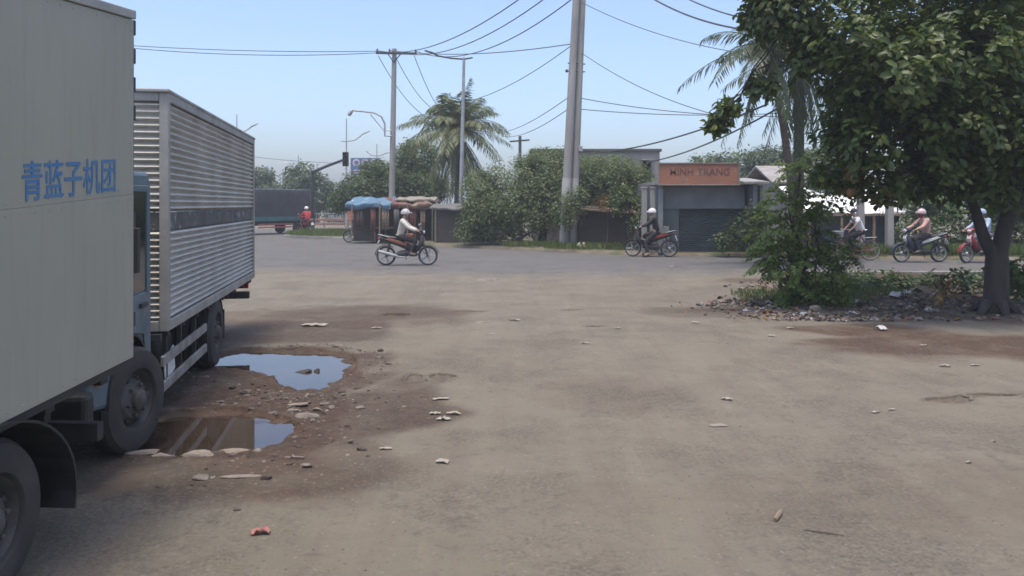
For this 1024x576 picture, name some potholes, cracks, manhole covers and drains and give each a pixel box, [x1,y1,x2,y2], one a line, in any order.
pothole [195,346,367,395]
pothole [88,404,319,464]
